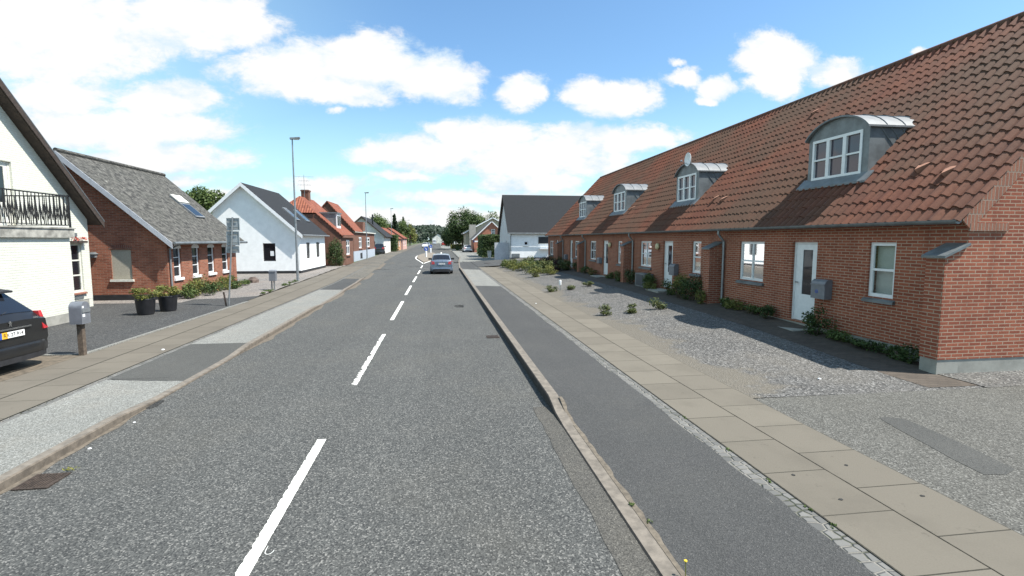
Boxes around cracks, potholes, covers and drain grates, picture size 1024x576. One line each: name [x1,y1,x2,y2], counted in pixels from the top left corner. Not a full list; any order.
drain grate [11,472,71,491]
